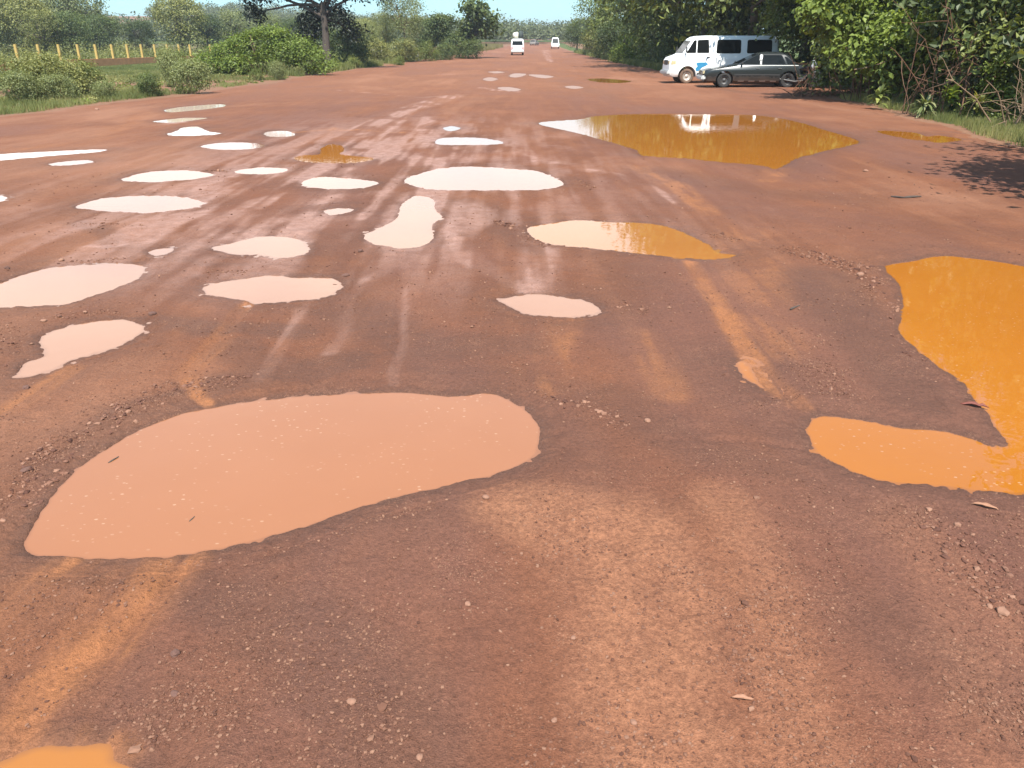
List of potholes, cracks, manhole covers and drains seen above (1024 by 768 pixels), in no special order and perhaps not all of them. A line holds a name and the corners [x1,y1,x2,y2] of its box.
pothole [0,379,568,579]
pothole [190,271,354,308]
pothole [0,716,173,768]
pothole [112,168,222,183]
pothole [194,141,272,150]
pothole [64,193,213,215]
pothole [427,136,511,146]
pothole [487,289,614,322]
pothole [870,130,970,143]
pothole [200,233,321,261]
pothole [285,143,383,164]
pothole [292,174,387,190]
